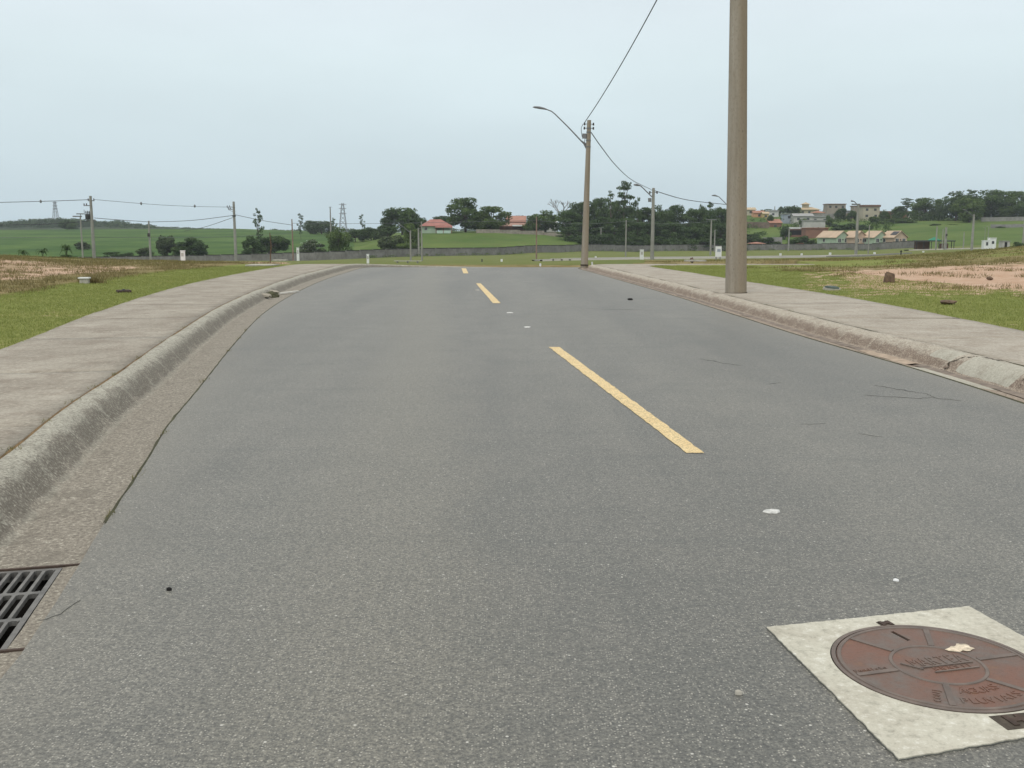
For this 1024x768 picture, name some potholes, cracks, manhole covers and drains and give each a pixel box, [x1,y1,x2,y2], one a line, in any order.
drain grate [0,563,80,653]
manhole cover [766,606,1024,761]
crack [869,385,959,401]
